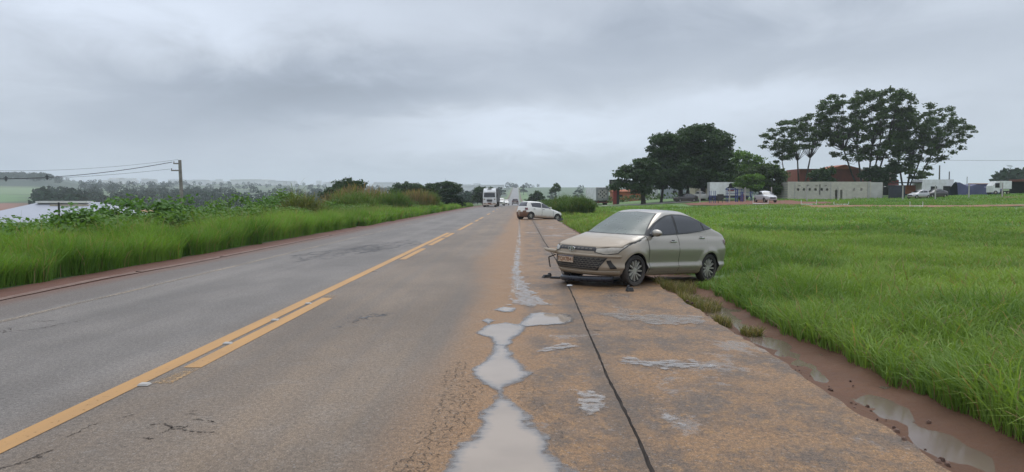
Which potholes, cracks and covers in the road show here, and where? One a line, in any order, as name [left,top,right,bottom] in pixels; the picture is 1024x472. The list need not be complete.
crack [392,362,483,472]
crack [0,413,214,469]
crack [331,313,393,327]
